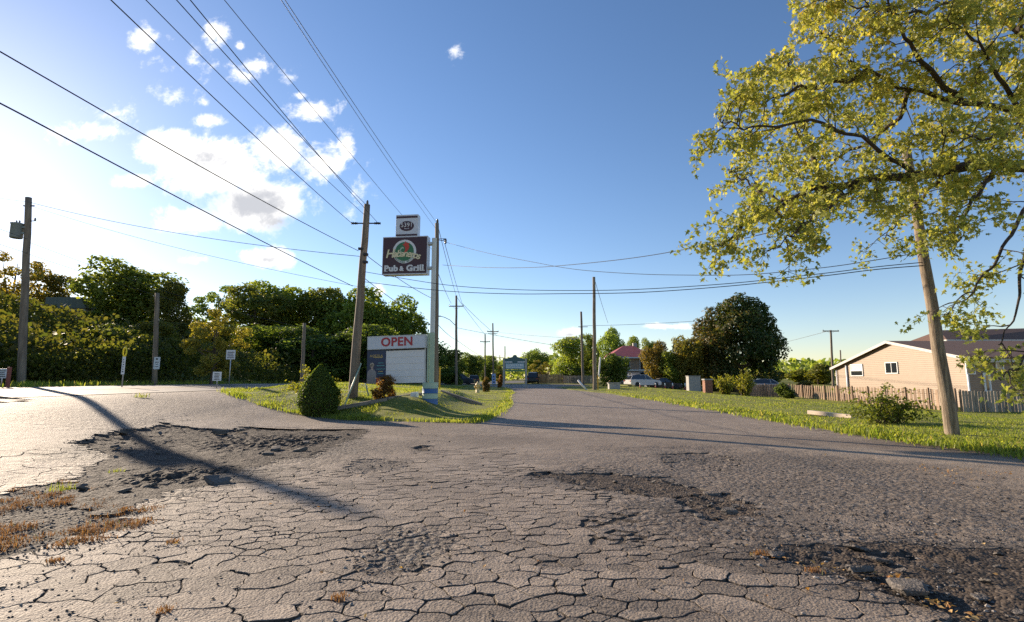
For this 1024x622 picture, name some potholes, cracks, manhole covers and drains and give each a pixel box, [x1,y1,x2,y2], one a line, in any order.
pothole [543,472,706,498]
pothole [55,422,369,515]
crack [0,419,1004,622]
pothole [768,541,1024,622]
pothole [525,471,560,479]
